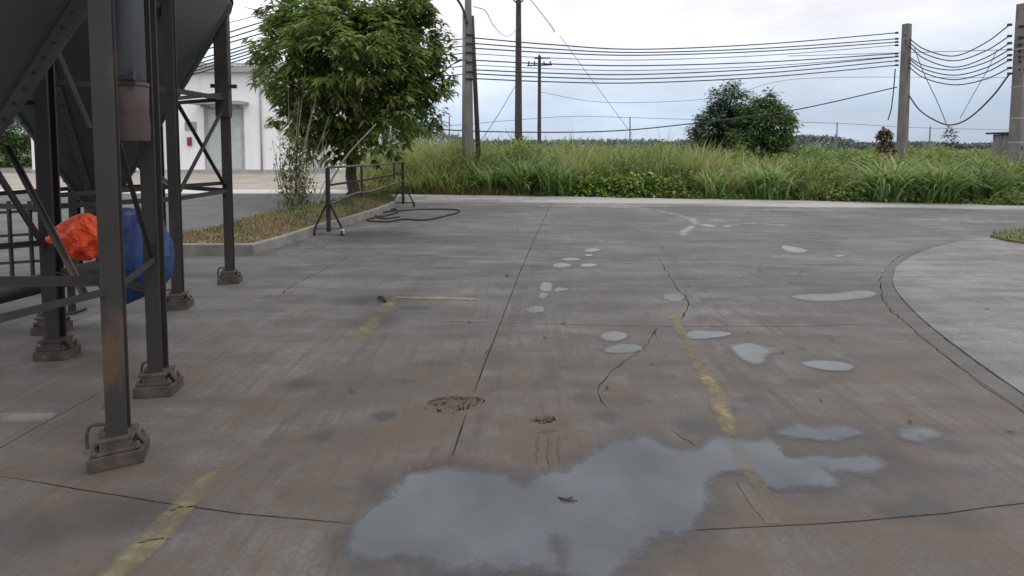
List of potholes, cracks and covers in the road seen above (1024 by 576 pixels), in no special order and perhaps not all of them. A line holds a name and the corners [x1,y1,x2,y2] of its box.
pothole [530,415,556,424]
crack [597,329,657,405]
crack [660,259,689,320]
pothole [422,396,485,414]
